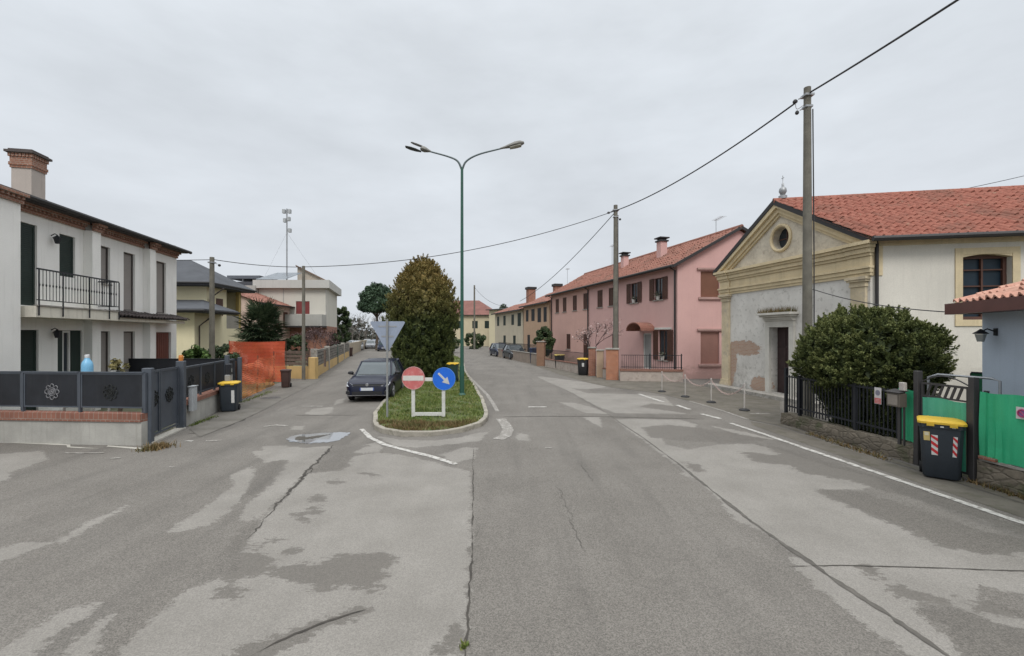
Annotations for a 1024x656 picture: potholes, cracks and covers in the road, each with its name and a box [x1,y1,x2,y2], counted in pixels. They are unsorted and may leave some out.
crack [251,609,366,656]
crack [246,446,332,539]
